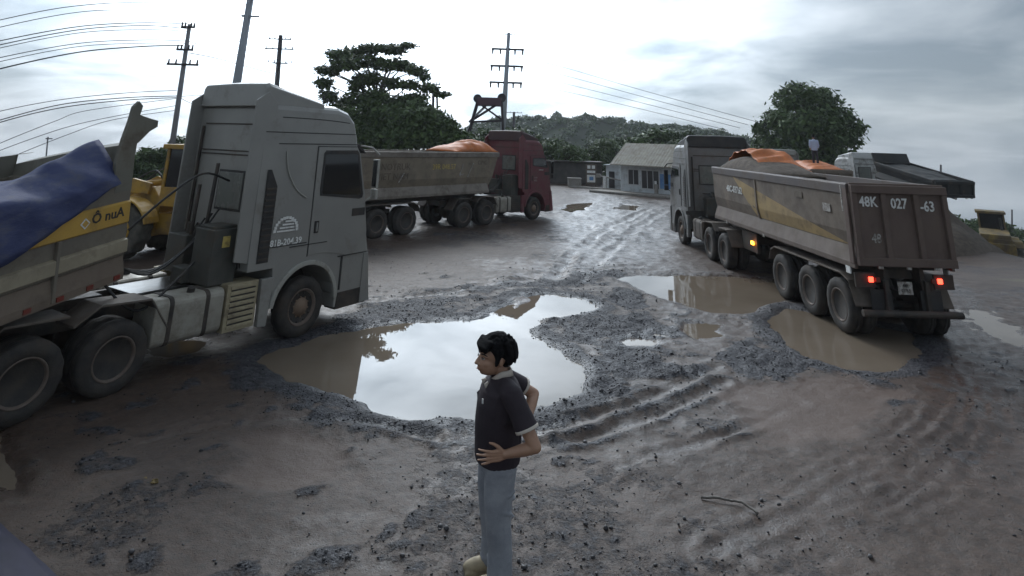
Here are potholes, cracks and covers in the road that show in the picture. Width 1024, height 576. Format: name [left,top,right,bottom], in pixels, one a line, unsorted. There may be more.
pothole [246,290,606,426]
pothole [757,304,935,374]
pothole [558,202,595,213]
pothole [955,306,1024,349]
pothole [612,272,791,314]
pothole [610,331,672,348]
pothole [613,203,642,211]
